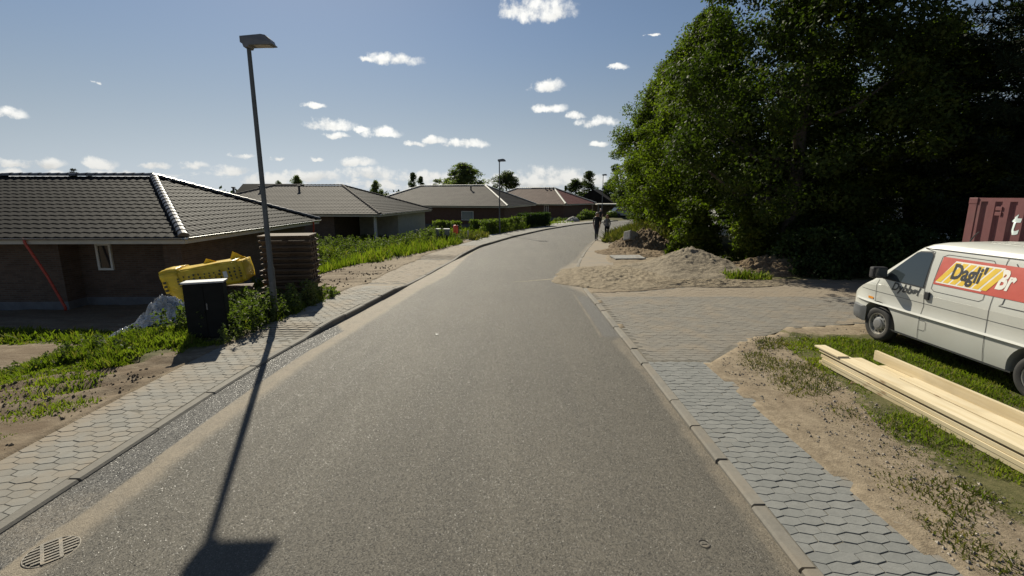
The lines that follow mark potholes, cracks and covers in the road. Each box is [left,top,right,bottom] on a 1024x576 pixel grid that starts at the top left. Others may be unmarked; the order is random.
drain grate [21,536,81,569]
